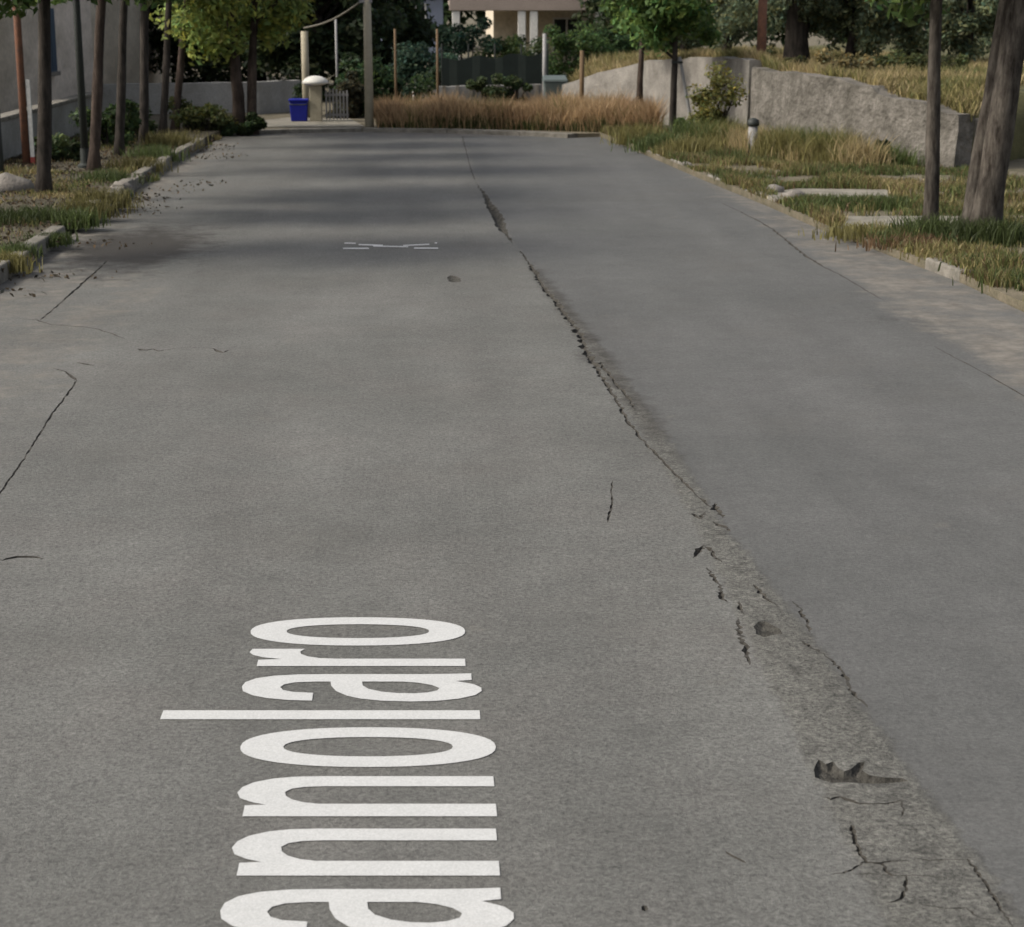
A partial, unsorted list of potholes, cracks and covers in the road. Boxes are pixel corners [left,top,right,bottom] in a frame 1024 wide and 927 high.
crack [824,796,1013,927]
pothole [814,760,907,784]
crack [29,258,229,353]
crack [0,362,94,493]
crack [462,136,475,180]
pothole [754,621,782,637]
crack [520,251,868,708]
